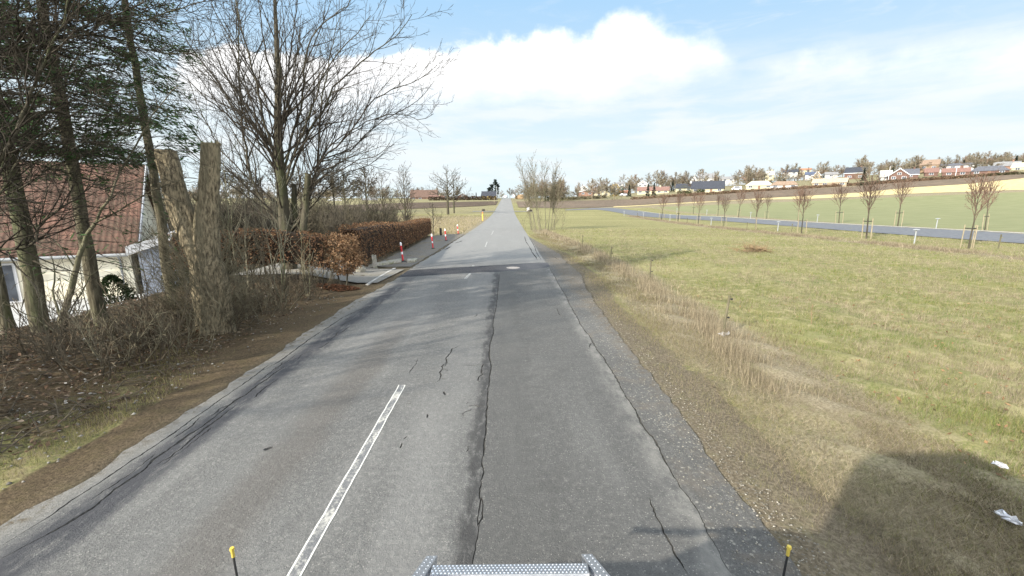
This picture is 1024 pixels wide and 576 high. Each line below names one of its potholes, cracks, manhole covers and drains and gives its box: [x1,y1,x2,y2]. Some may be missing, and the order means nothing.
crack [551,271,731,573]
